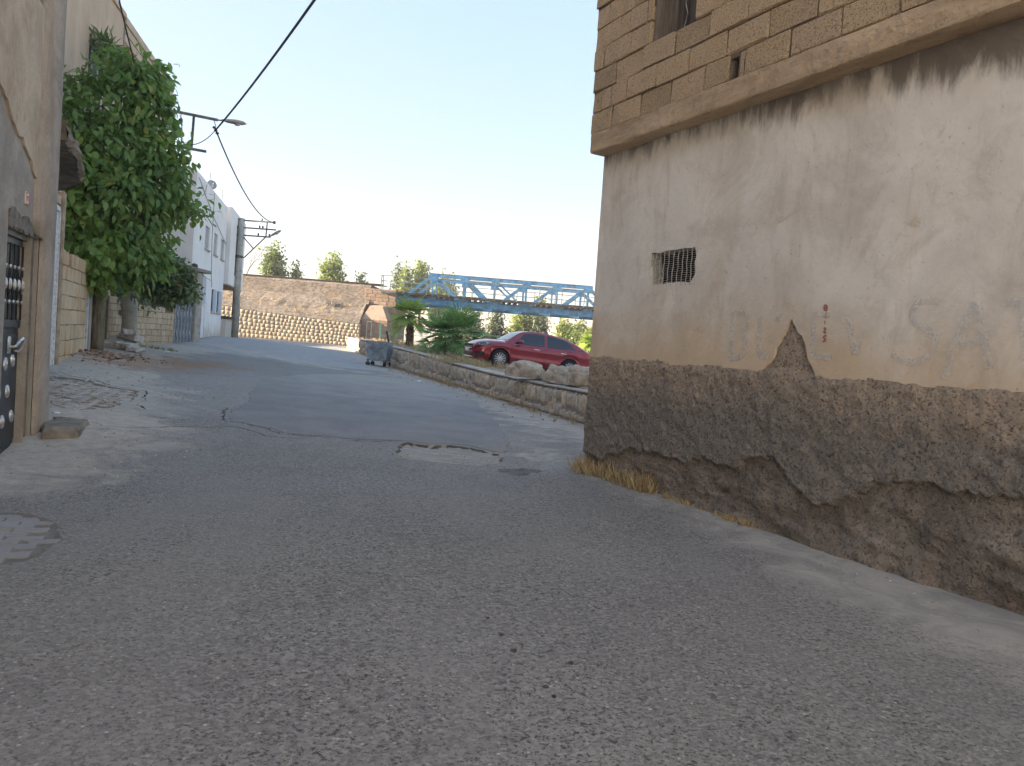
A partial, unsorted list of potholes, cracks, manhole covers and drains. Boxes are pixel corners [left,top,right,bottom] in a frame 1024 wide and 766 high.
pothole [497,468,542,476]
crack [113,408,327,440]
